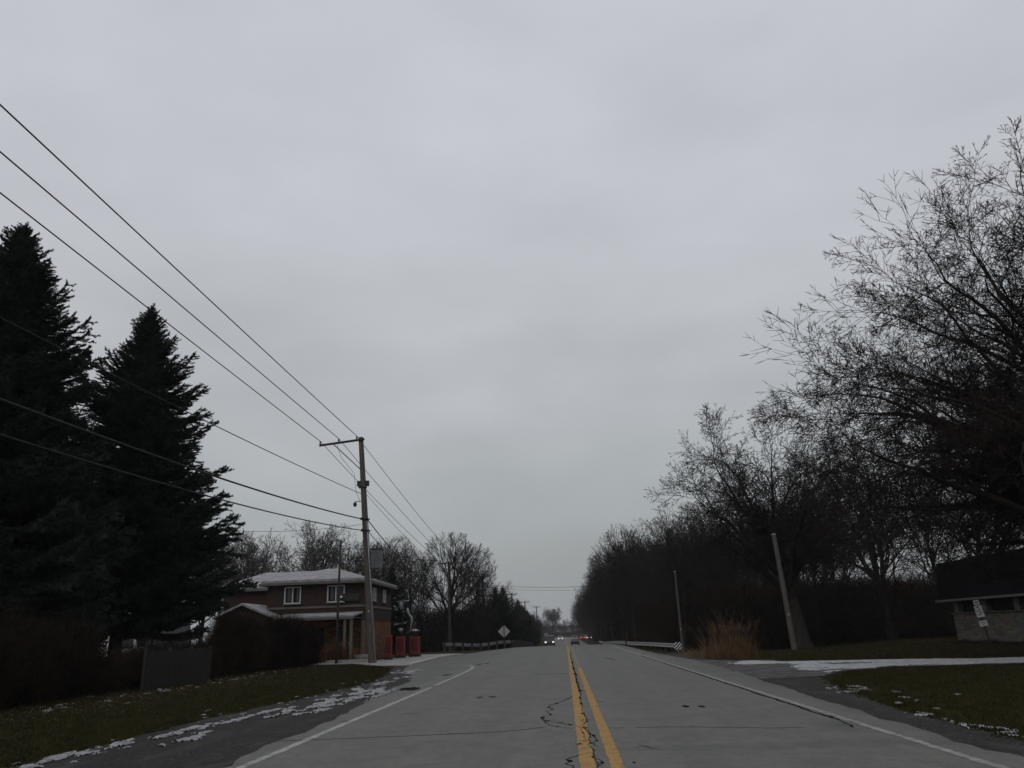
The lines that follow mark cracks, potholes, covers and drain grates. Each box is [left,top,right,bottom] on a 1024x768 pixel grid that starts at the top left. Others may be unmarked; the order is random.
crack [286,654,604,768]
